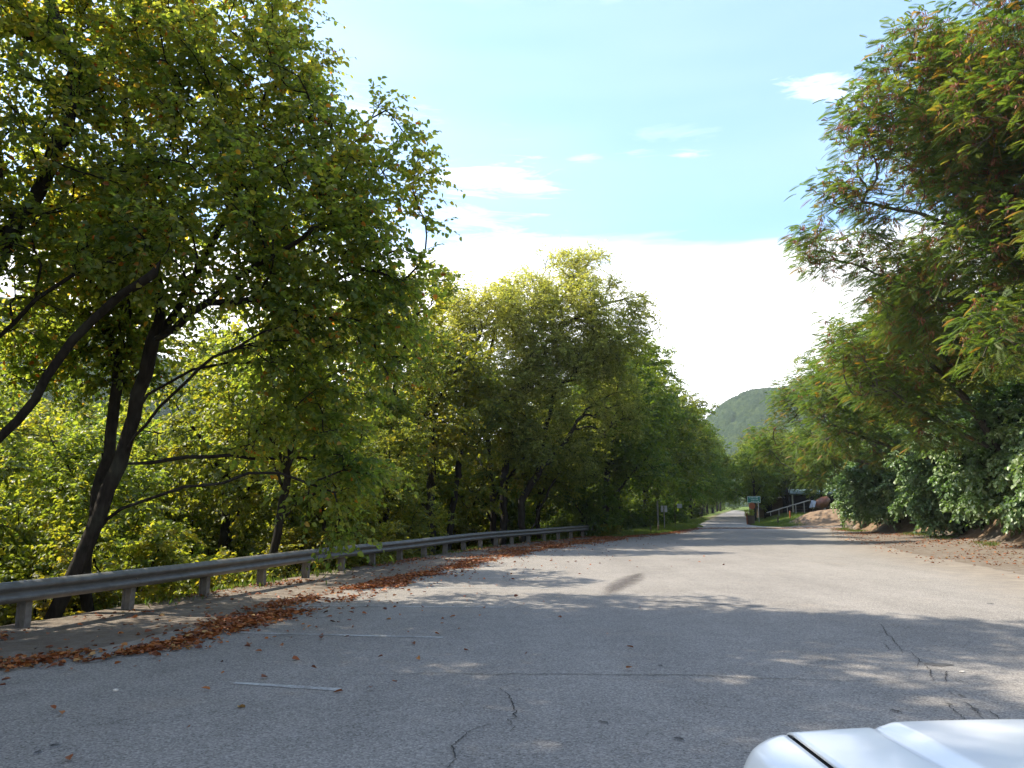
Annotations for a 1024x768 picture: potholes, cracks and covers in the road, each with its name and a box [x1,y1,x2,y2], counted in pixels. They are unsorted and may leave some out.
crack [448,725,485,767]
crack [357,672,913,730]
crack [881,624,999,719]
